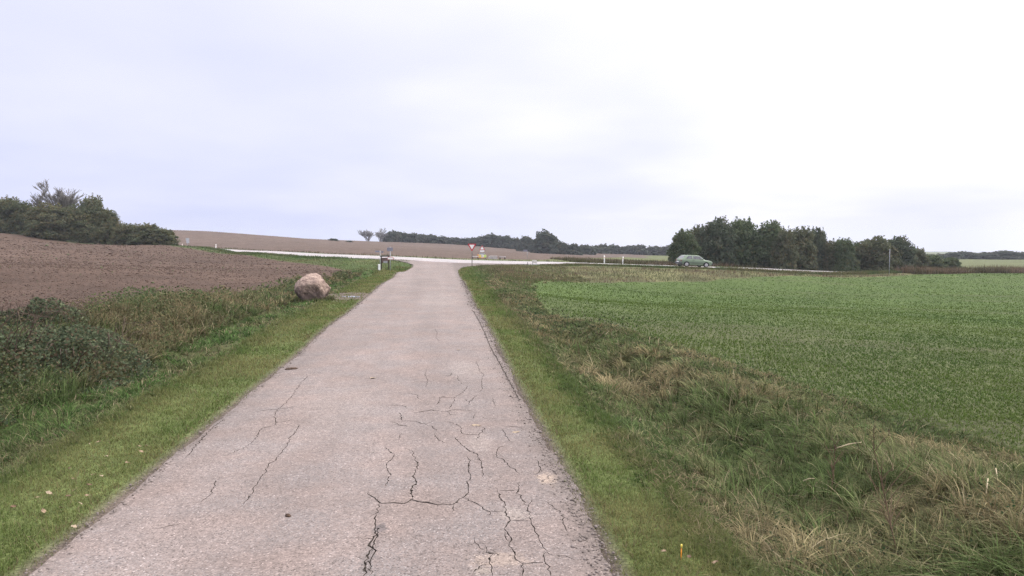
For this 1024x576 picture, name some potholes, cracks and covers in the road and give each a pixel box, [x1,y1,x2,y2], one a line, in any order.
crack [362,310,572,576]
crack [225,377,307,507]
